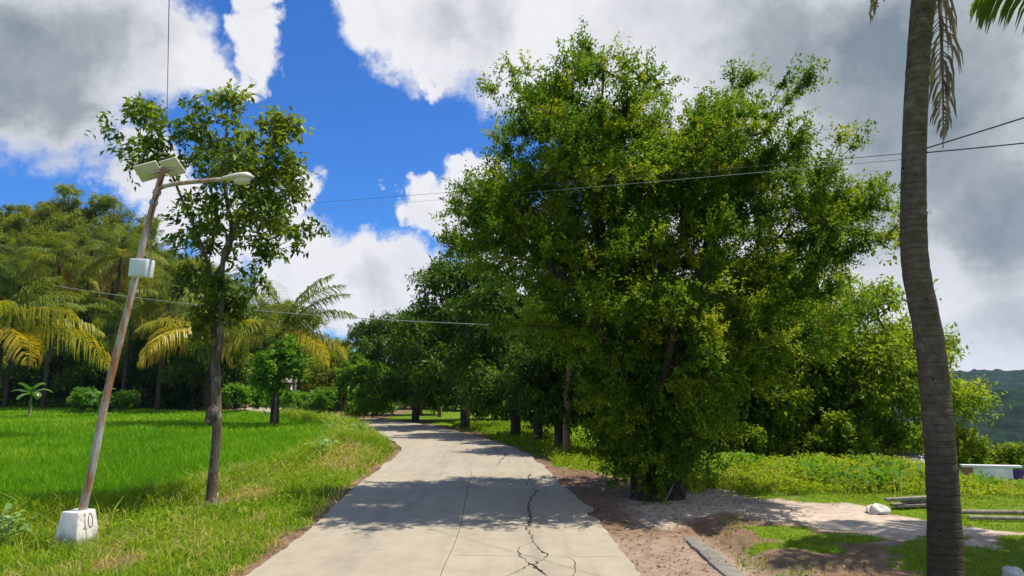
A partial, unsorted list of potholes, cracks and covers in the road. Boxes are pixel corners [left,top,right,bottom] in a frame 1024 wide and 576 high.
crack [517,474,548,575]
